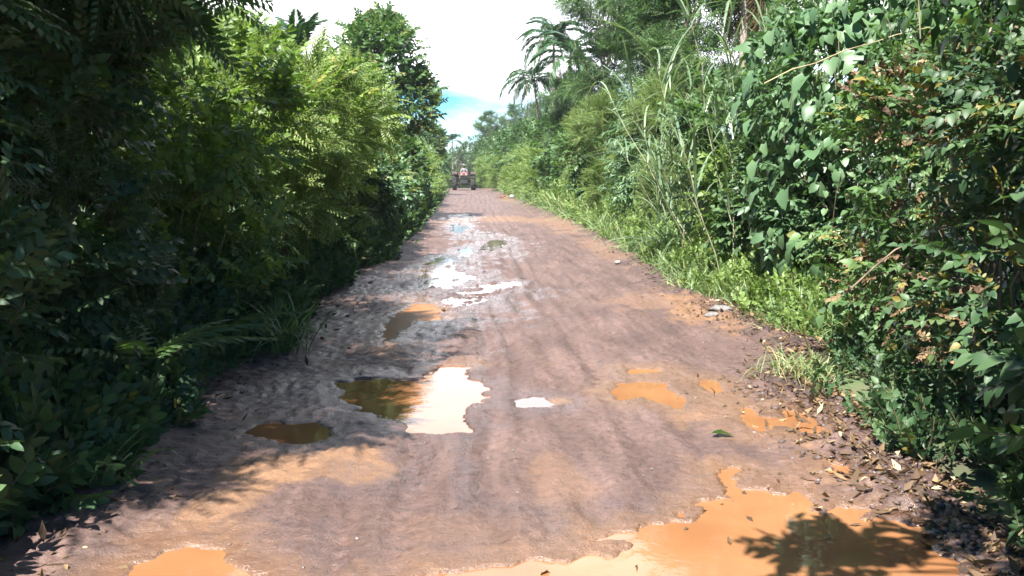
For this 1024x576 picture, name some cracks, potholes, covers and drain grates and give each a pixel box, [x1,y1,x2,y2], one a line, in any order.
pothole [819,459,856,476]
pothole [376,302,445,342]
pothole [325,363,504,437]
pothole [438,279,529,314]
pothole [446,245,484,259]
pothole [726,403,836,436]
pothole [410,464,984,576]
pothole [506,393,569,409]
pothole [605,379,697,410]
pothole [480,237,511,253]
pothole [413,256,479,291]
pothole [106,538,274,576]
